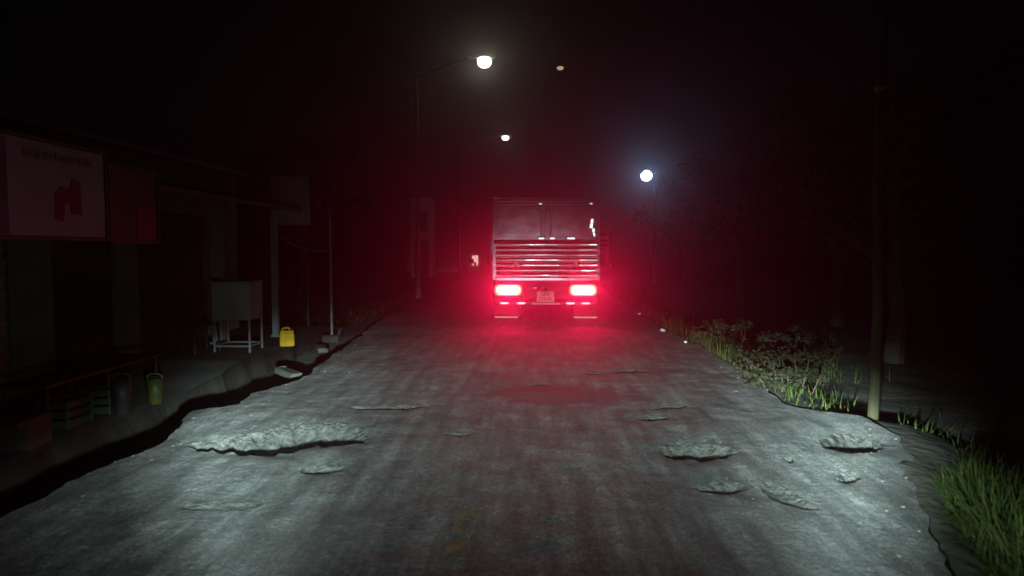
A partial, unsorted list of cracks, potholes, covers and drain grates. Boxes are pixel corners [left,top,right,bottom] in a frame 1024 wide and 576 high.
pothole [758,481,821,510]
pothole [834,472,861,484]
pothole [299,464,348,475]
pothole [693,479,748,495]
pothole [819,434,884,453]
pothole [186,423,370,457]
pothole [659,442,738,463]
